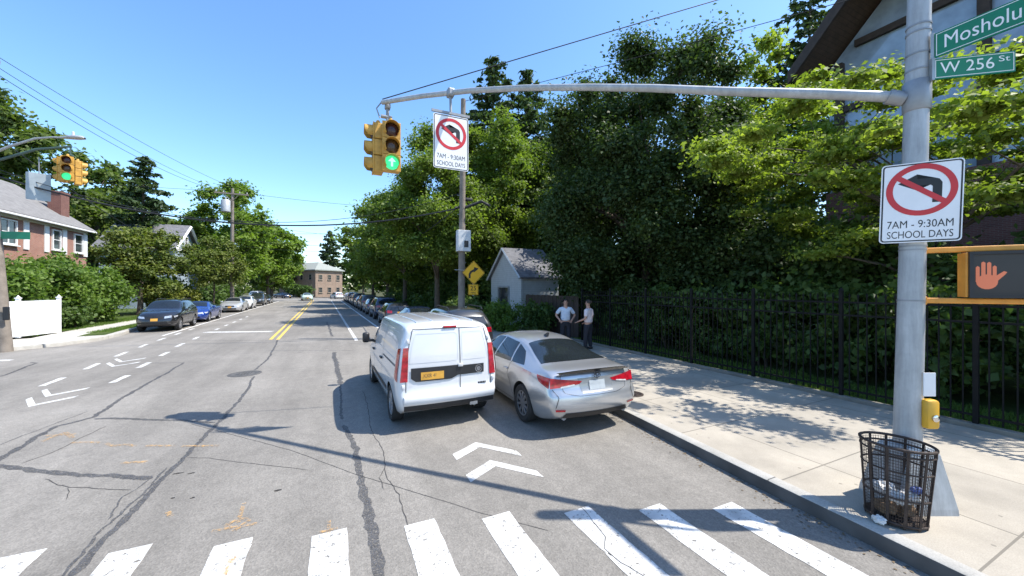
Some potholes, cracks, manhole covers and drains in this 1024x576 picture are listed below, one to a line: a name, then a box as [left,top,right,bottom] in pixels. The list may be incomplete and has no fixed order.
crack [47,479,128,499]
crack [190,392,548,531]
